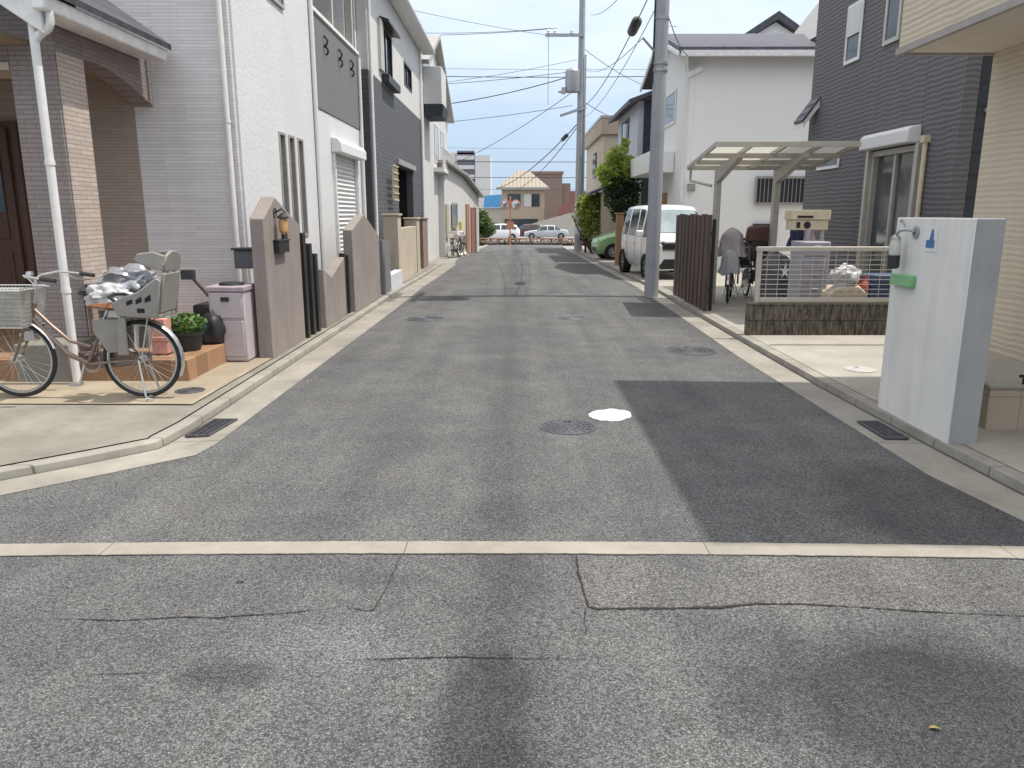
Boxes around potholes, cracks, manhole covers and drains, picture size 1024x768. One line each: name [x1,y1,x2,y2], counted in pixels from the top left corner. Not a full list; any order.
drain grate [857,420,910,439]
crack [353,555,401,611]
crack [576,555,1023,634]
manhole cover [540,419,597,435]
manhole cover [663,346,717,355]
drain grate [185,418,238,437]
crack [65,607,341,621]
